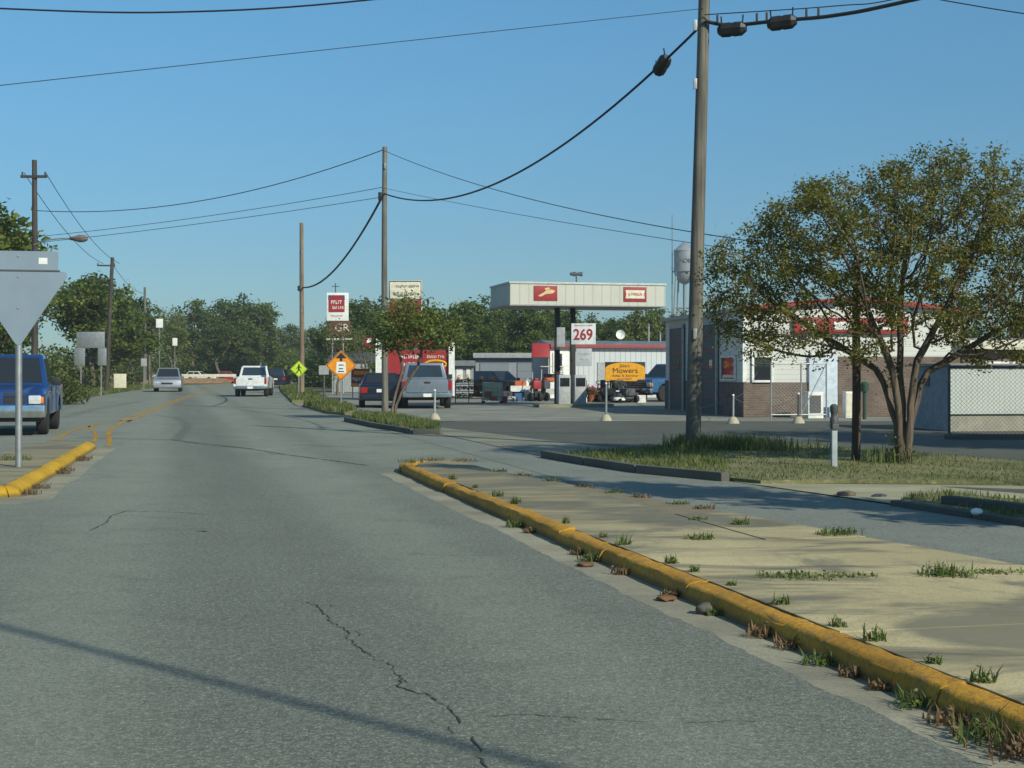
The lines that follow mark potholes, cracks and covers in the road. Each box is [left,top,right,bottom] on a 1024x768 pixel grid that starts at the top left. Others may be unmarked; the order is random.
crack [297,599,488,768]
crack [491,714,757,723]
